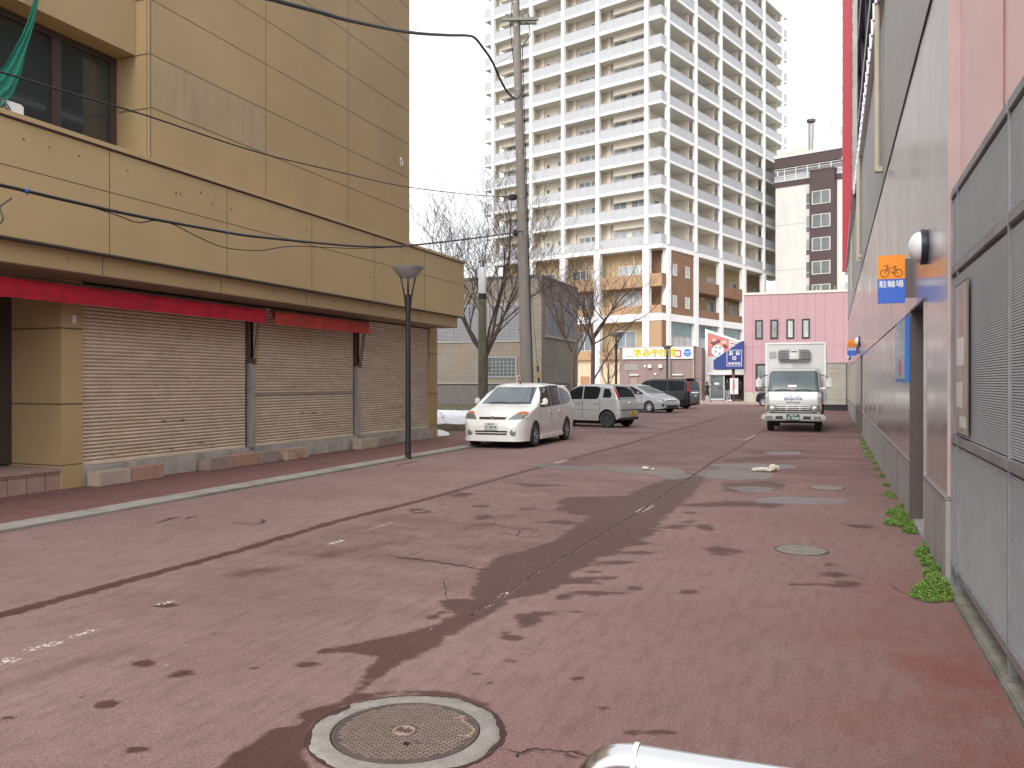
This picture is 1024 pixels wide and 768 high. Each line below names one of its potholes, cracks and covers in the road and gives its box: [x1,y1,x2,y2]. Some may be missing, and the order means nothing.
manhole cover [774,545,830,556]
crack [499,747,588,759]
crack [390,411,766,615]
manhole cover [304,695,507,768]
